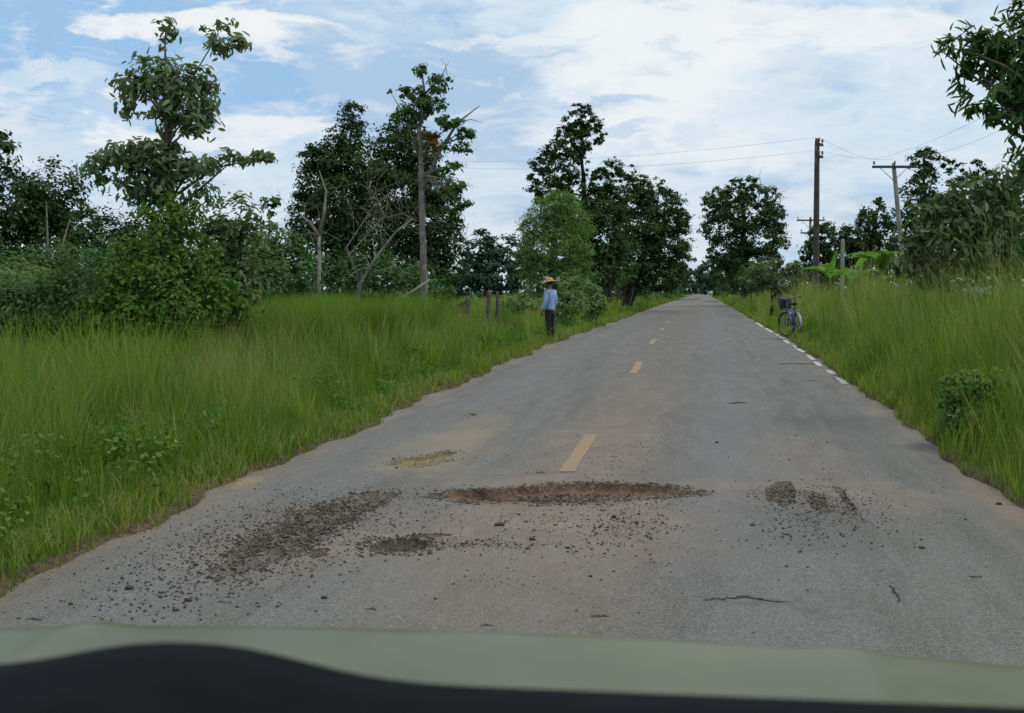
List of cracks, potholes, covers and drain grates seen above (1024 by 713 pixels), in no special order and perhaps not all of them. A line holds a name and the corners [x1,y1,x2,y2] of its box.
pothole [765,481,798,507]
pothole [832,487,857,511]
pothole [216,493,395,576]
pothole [369,539,429,552]
pothole [435,483,699,504]
pothole [802,491,828,513]
